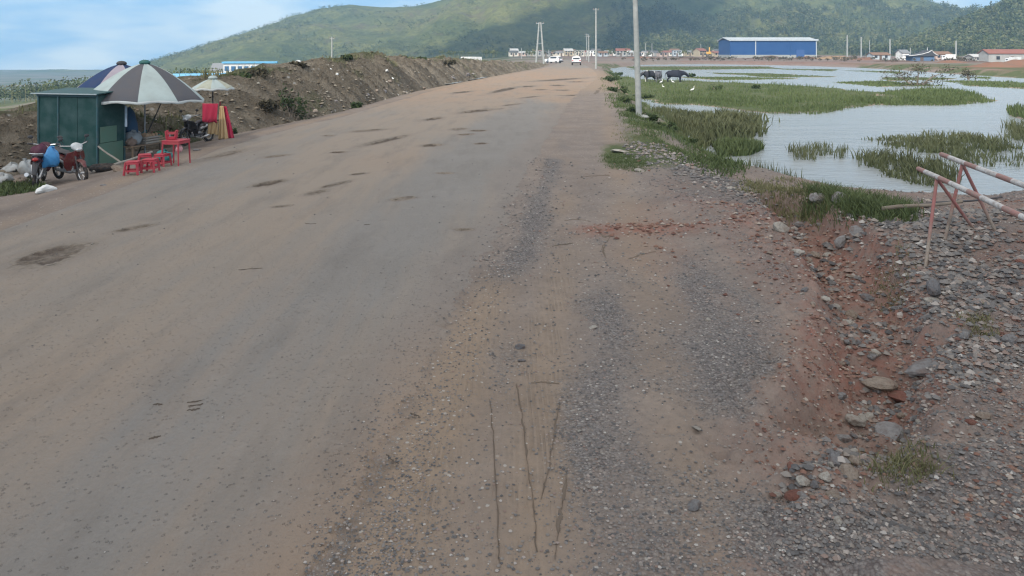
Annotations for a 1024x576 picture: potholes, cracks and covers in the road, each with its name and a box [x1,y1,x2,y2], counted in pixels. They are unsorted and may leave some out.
pothole [356,135,410,148]
crack [516,381,568,555]
pothole [246,179,289,188]
pothole [112,223,157,233]
pothole [5,242,99,270]
crack [490,404,500,563]
